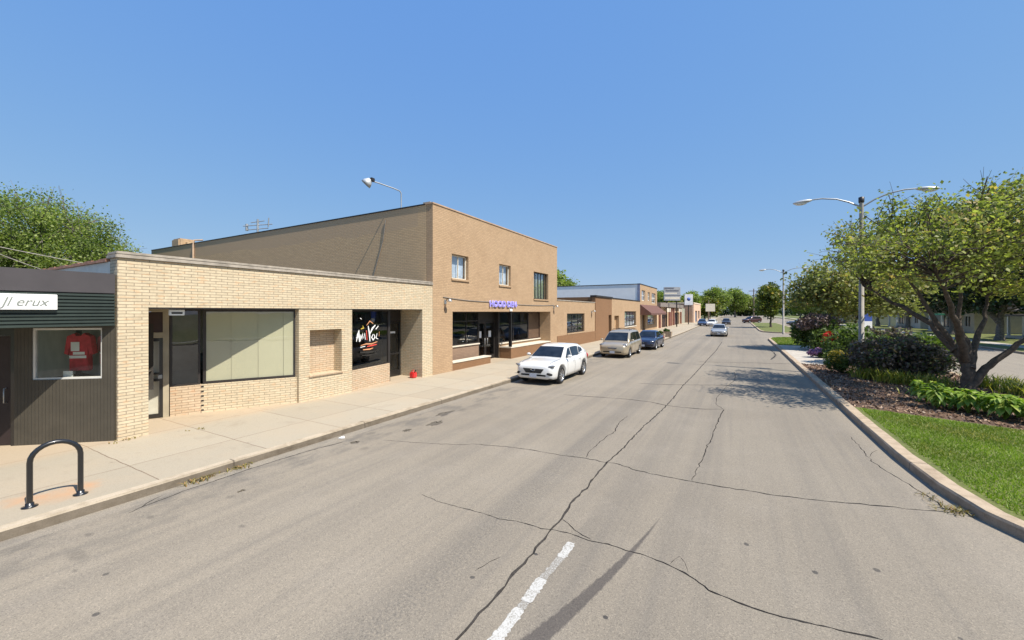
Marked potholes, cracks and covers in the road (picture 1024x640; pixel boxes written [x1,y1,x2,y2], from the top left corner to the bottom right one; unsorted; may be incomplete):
crack [389,342,944,640]
